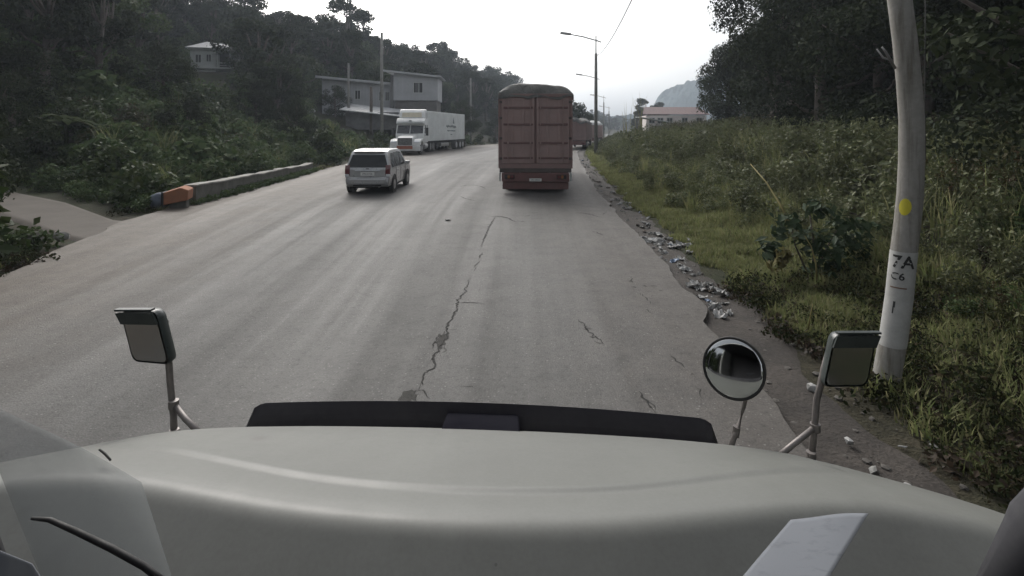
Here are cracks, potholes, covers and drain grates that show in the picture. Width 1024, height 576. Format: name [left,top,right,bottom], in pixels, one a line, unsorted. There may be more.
crack [398,215,530,401]
